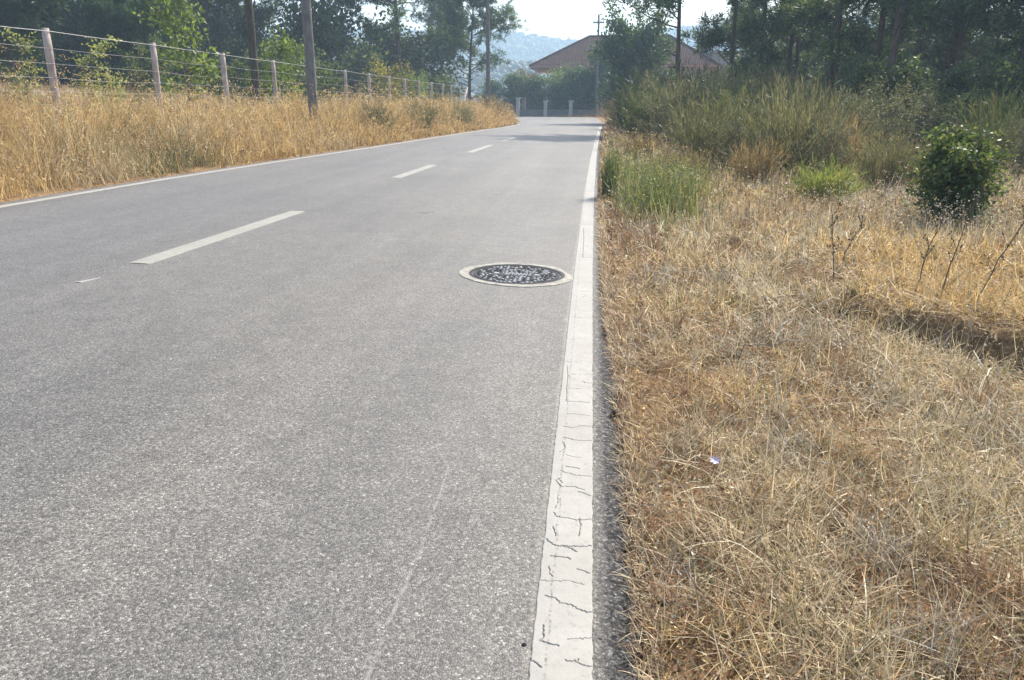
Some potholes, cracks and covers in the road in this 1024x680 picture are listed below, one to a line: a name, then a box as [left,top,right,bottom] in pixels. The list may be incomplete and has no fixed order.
manhole cover [459,262,573,287]
